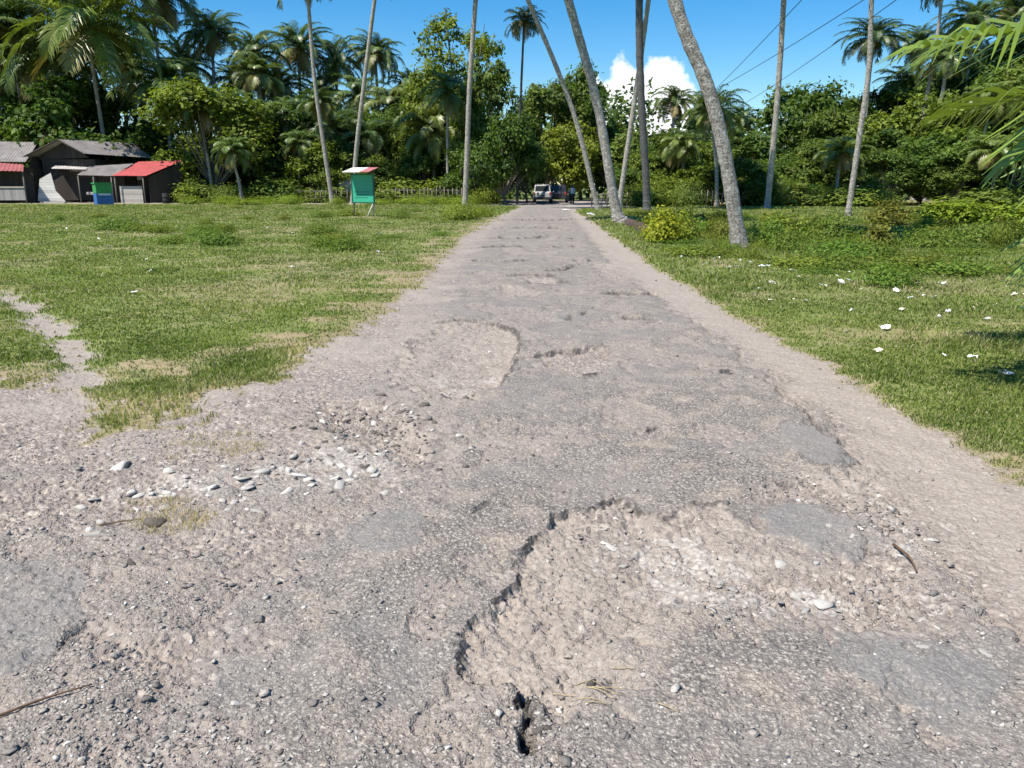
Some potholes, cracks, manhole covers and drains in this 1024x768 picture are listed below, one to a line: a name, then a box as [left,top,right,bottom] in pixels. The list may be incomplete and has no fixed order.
pothole [452,497,980,726]
crack [470,499,513,515]
pothole [516,275,563,285]
pothole [287,397,442,469]
pothole [489,283,548,298]
pothole [374,318,524,408]
